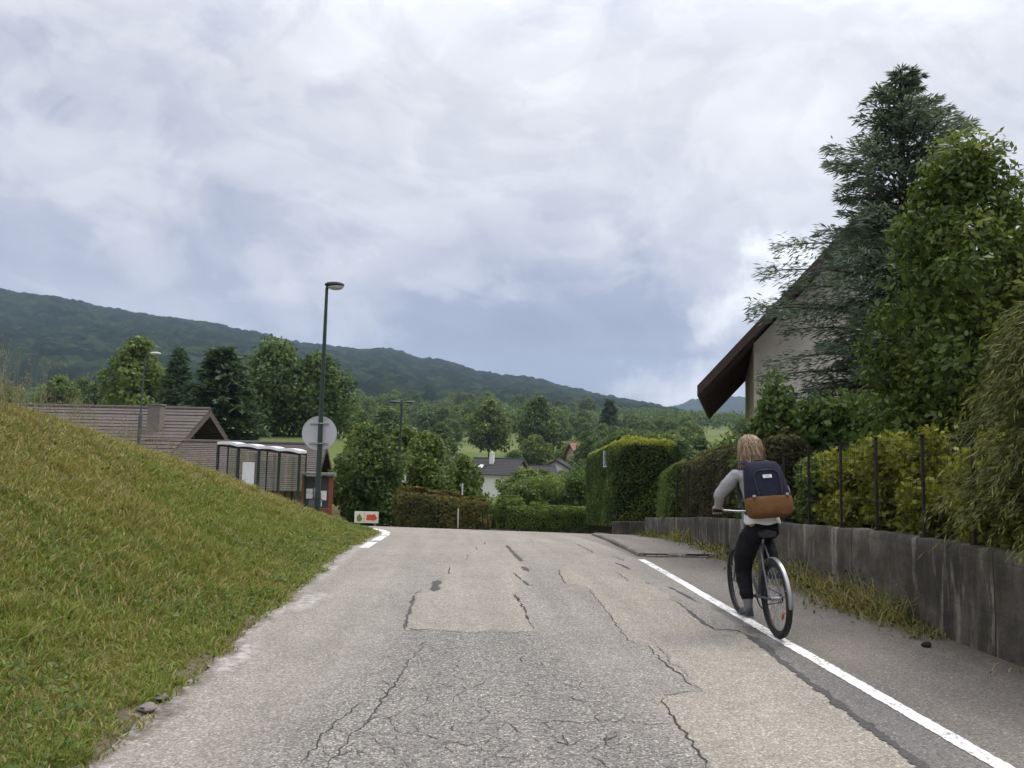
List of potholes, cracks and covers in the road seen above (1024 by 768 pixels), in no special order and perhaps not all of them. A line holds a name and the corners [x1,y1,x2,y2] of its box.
crack [678,602,746,634]
crack [299,635,708,768]
crack [409,594,534,633]
